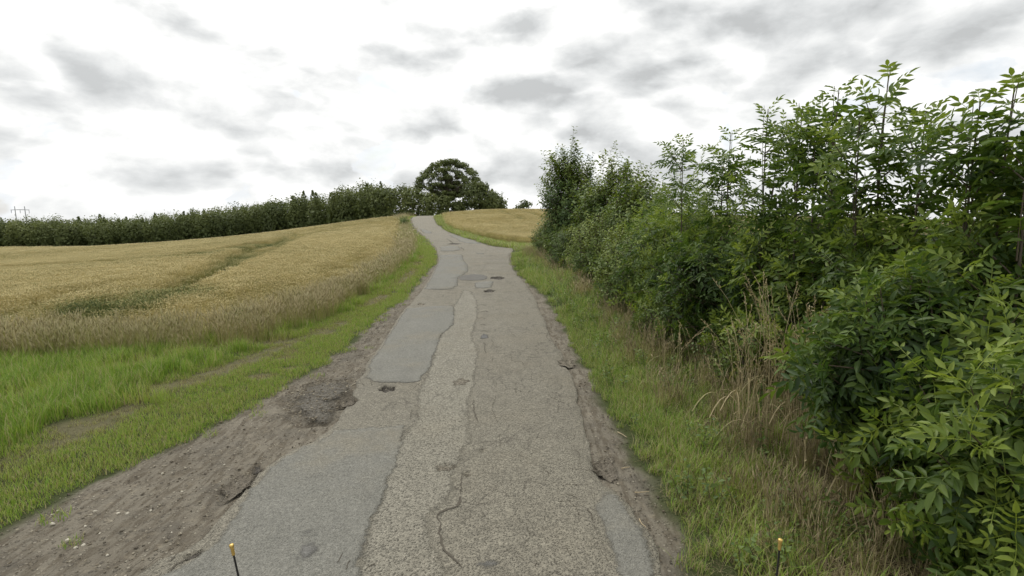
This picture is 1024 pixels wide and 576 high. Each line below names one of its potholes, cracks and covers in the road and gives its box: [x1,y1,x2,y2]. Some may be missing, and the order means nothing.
crack [437,497,461,521]
pothole [592,456,618,482]
pothole [337,397,357,408]
